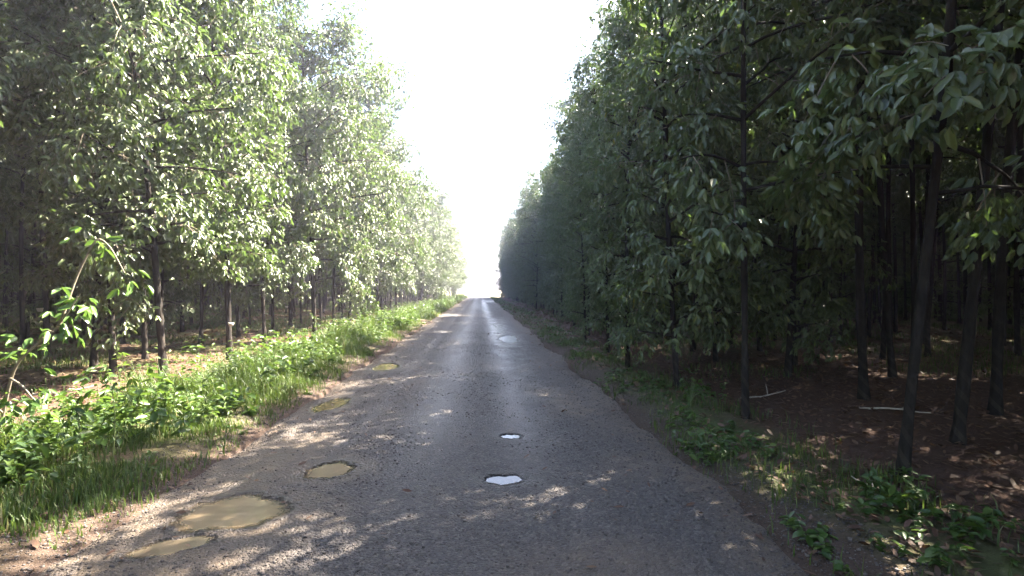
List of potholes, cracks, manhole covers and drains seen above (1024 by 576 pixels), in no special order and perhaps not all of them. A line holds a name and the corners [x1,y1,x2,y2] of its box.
pothole [495,334,520,344]
pothole [481,473,528,486]
pothole [368,362,402,372]
pothole [305,396,354,415]
pothole [156,490,304,540]
pothole [297,459,362,481]
pothole [110,531,224,563]
